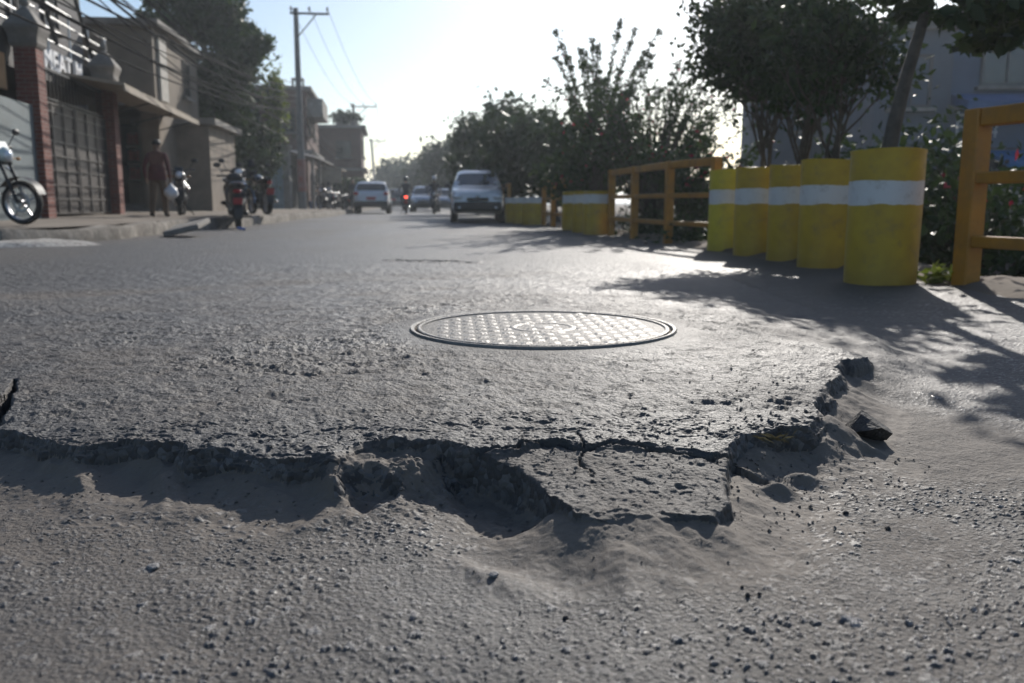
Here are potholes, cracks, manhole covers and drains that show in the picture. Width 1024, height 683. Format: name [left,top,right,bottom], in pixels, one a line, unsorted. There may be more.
crack [475,432,727,486]
manhole cover [410,310,677,350]
pothole [0,362,924,610]
